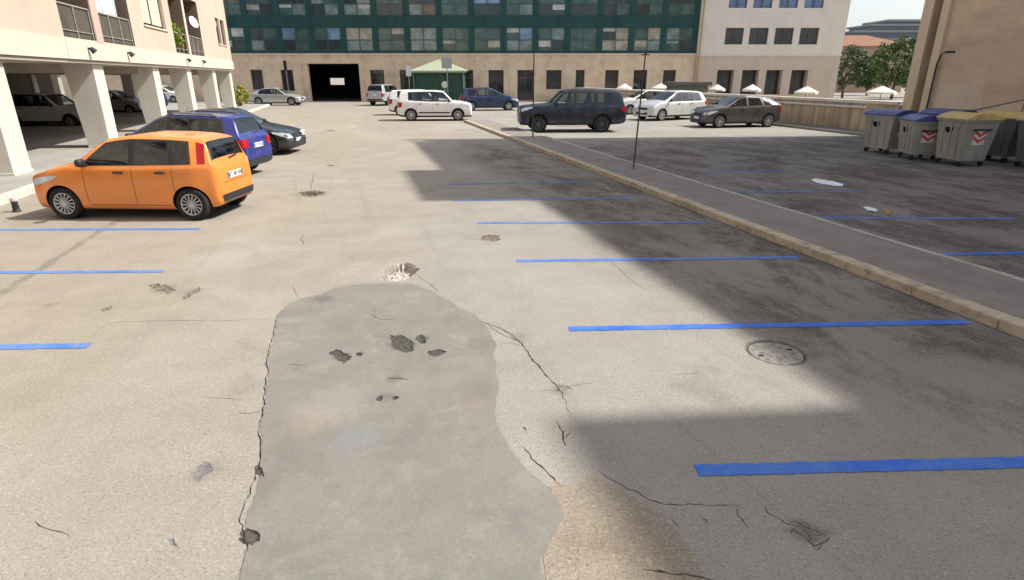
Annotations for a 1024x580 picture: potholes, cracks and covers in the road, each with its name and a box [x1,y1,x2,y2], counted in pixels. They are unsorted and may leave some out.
pothole [329,349,352,363]
pothole [389,335,415,353]
crack [475,315,591,487]
pothole [378,262,420,282]
pothole [148,283,176,295]
manhole cover [744,340,809,366]
crack [594,468,829,551]
crack [90,285,341,579]
